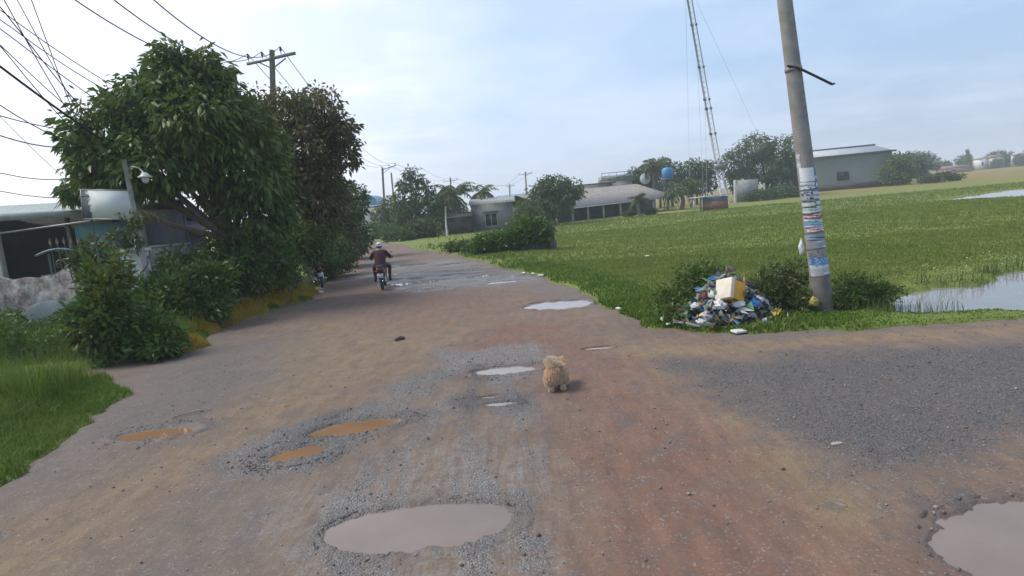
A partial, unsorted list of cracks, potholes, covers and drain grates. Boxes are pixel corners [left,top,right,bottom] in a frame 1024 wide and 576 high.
pothole [460,362,546,378]
pothole [244,436,347,470]
pothole [890,484,1024,576]
pothole [472,398,529,409]
pothole [98,422,216,446]
pothole [287,411,421,446]
pothole [509,297,602,313]
pothole [454,272,516,280]
pothole [384,278,459,287]
pothole [300,492,535,567]
